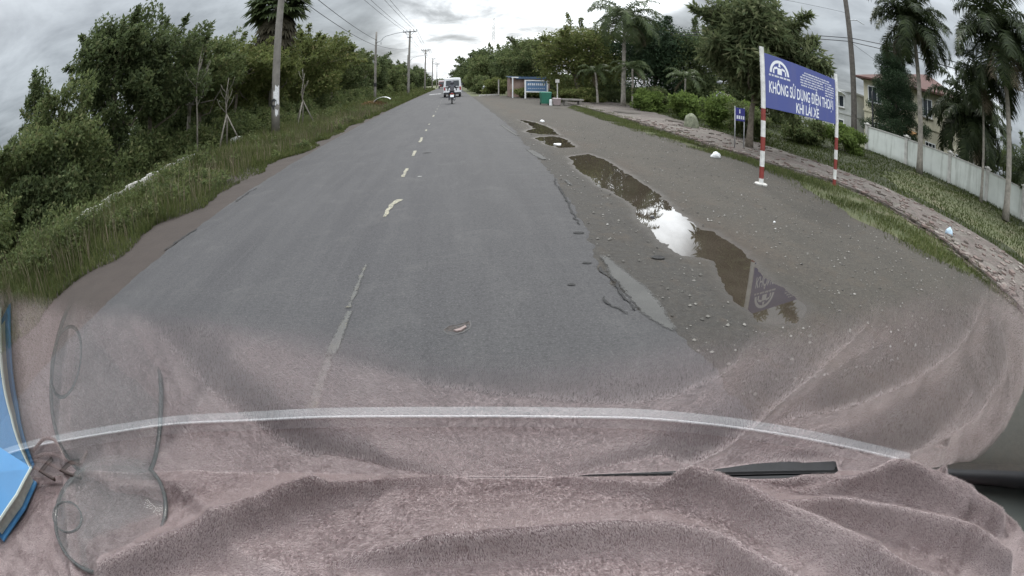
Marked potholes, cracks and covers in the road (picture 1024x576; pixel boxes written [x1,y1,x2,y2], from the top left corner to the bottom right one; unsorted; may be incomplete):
crack [599,266,635,313]
pothole [442,320,472,335]
crack [554,177,580,224]
